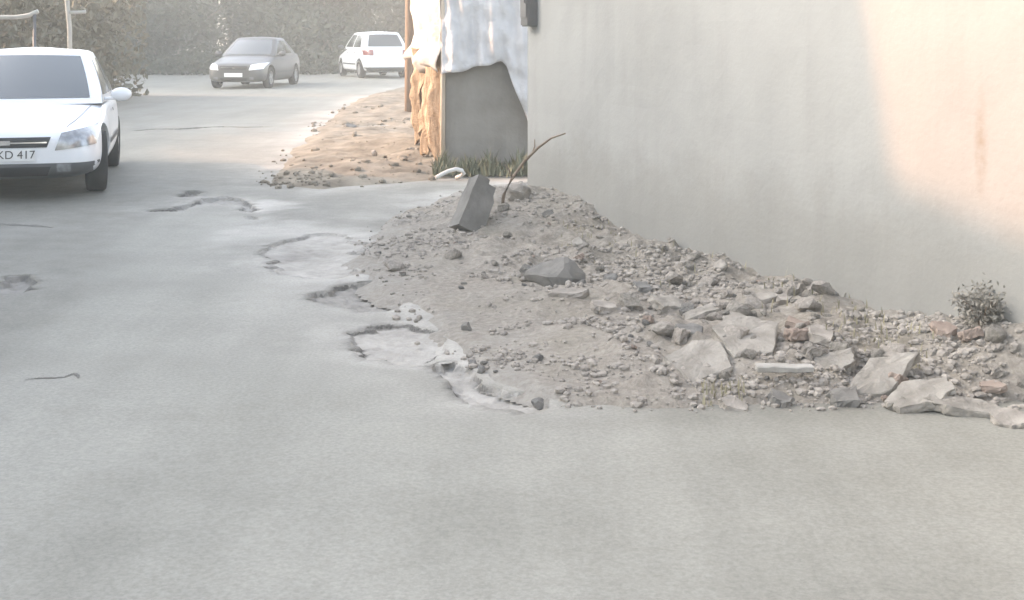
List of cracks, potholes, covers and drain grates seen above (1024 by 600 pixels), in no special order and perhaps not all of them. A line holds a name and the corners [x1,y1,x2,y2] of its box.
pothole [259,234,369,279]
pothole [346,324,452,366]
pothole [0,276,37,295]
pothole [308,282,391,313]
pothole [150,197,257,220]
